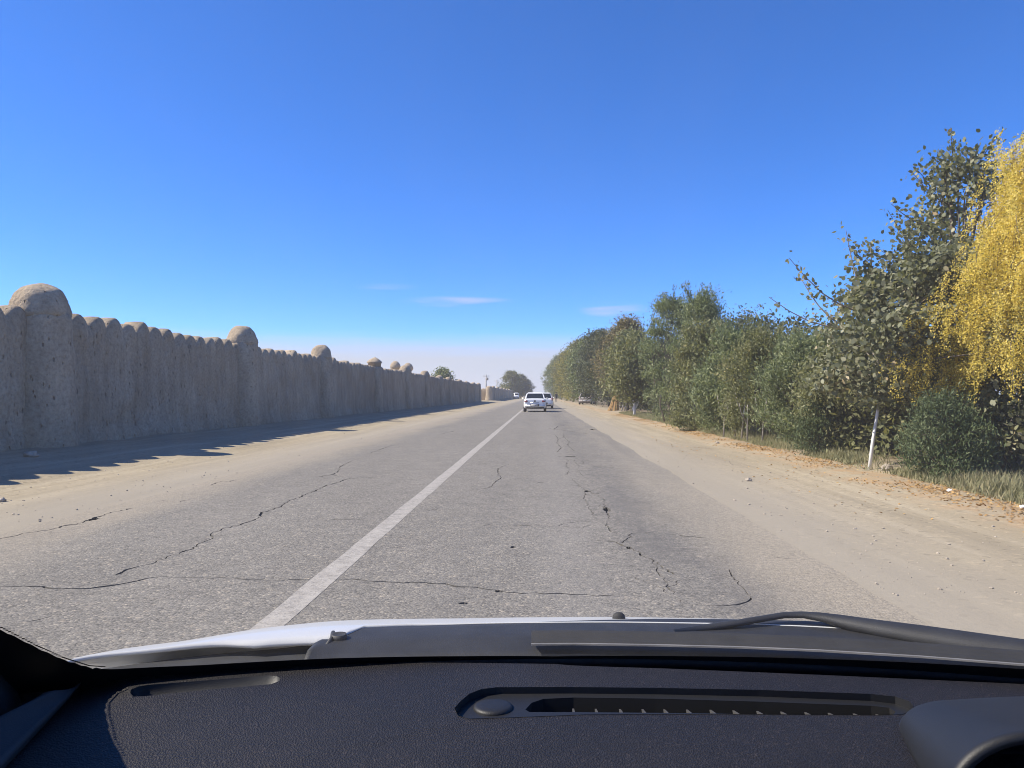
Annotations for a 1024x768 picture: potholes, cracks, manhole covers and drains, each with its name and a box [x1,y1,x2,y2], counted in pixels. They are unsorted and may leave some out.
crack [520,426,703,606]
crack [1,462,613,596]
